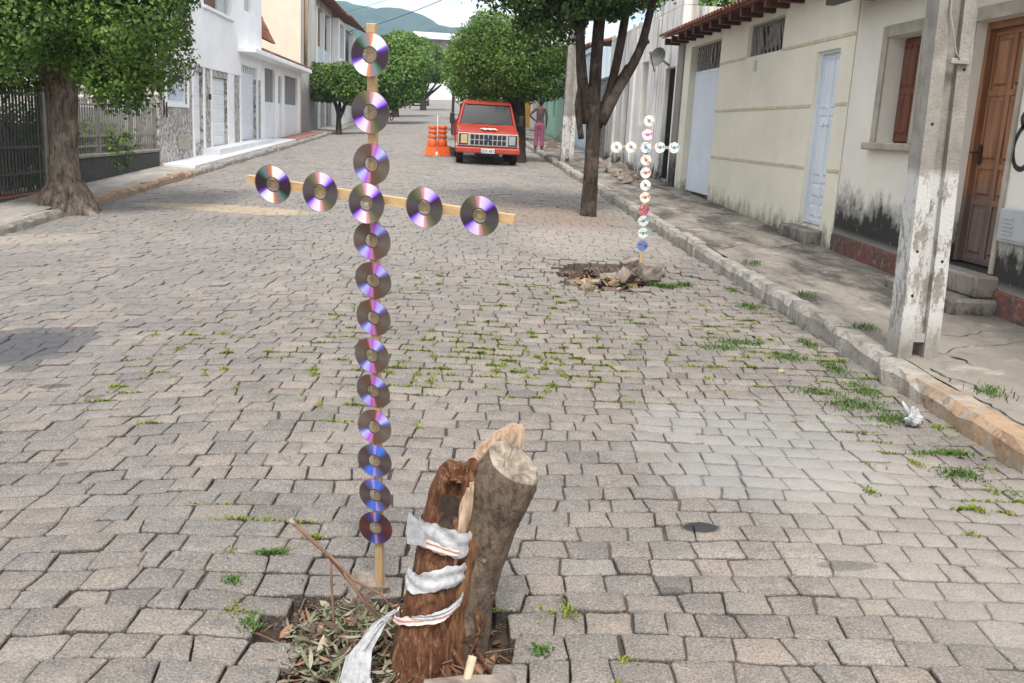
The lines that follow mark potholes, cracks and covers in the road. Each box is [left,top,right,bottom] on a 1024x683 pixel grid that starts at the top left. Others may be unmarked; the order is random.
pothole [253,586,528,683]
